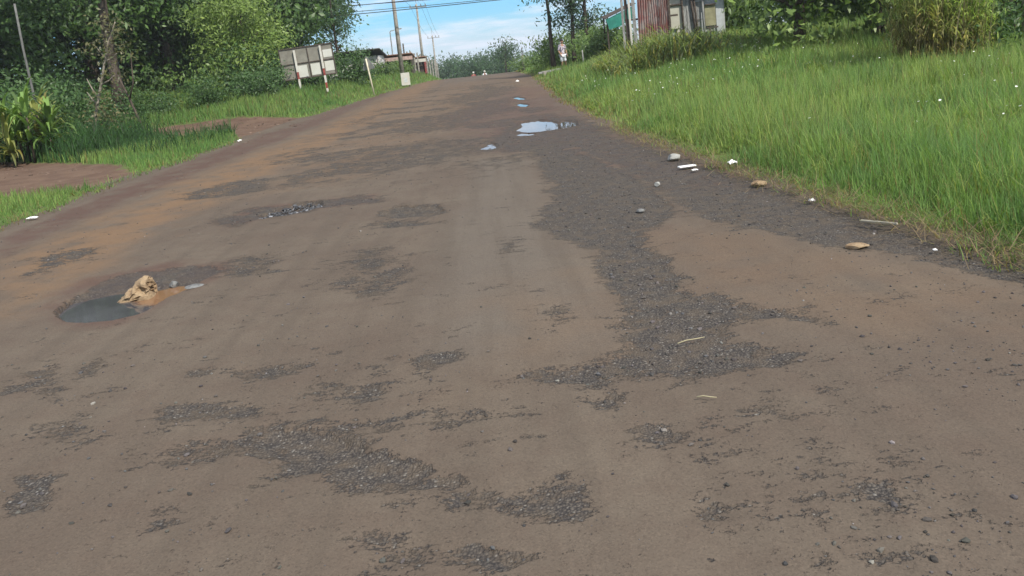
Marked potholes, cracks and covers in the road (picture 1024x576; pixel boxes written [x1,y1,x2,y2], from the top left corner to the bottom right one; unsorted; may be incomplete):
pothole [256,200,326,219]
pothole [52,265,223,323]
pothole [514,119,578,133]
